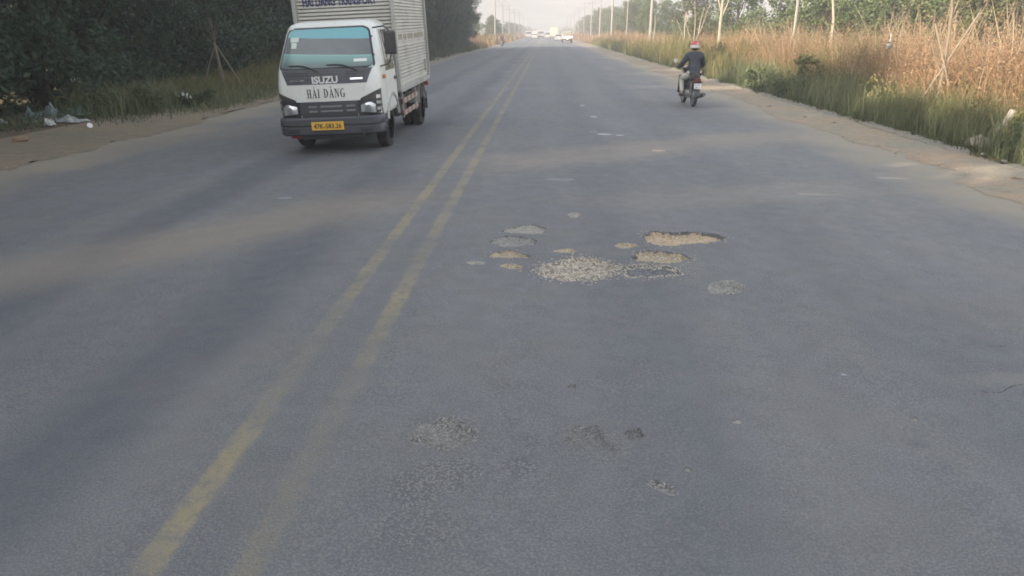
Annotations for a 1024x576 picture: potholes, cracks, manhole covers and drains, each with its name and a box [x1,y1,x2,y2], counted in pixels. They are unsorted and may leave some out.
pothole [624,428,645,441]
pothole [648,480,679,496]
pothole [637,230,727,248]
pothole [612,261,696,281]
pothole [395,410,499,460]
pothole [631,250,697,267]
pothole [488,250,530,258]
pothole [519,253,622,286]
pothole [499,225,549,235]
pothole [489,233,541,248]
pothole [562,424,618,452]
